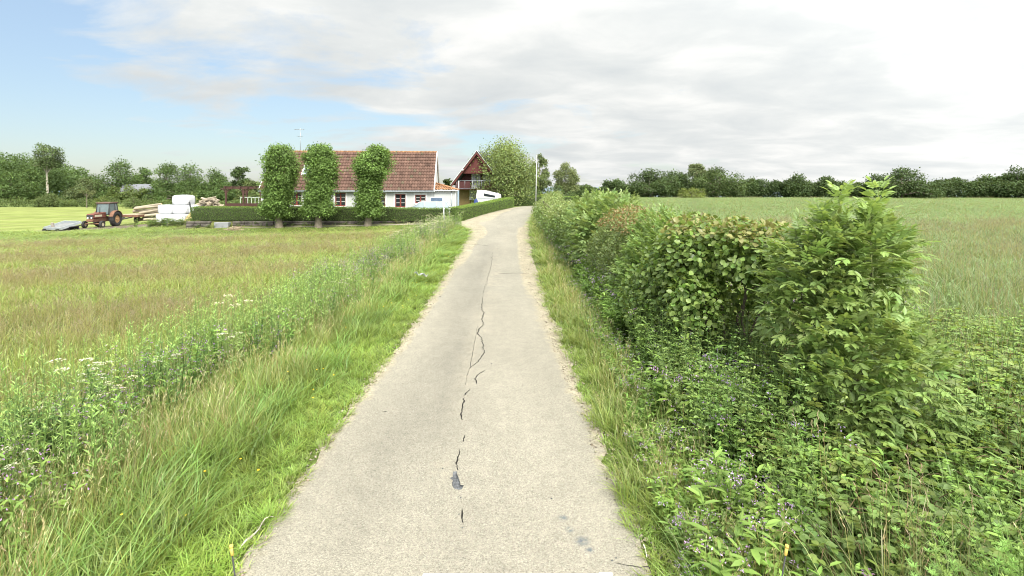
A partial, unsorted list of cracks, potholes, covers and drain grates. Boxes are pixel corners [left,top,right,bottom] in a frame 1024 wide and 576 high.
crack [455,244,493,470]
